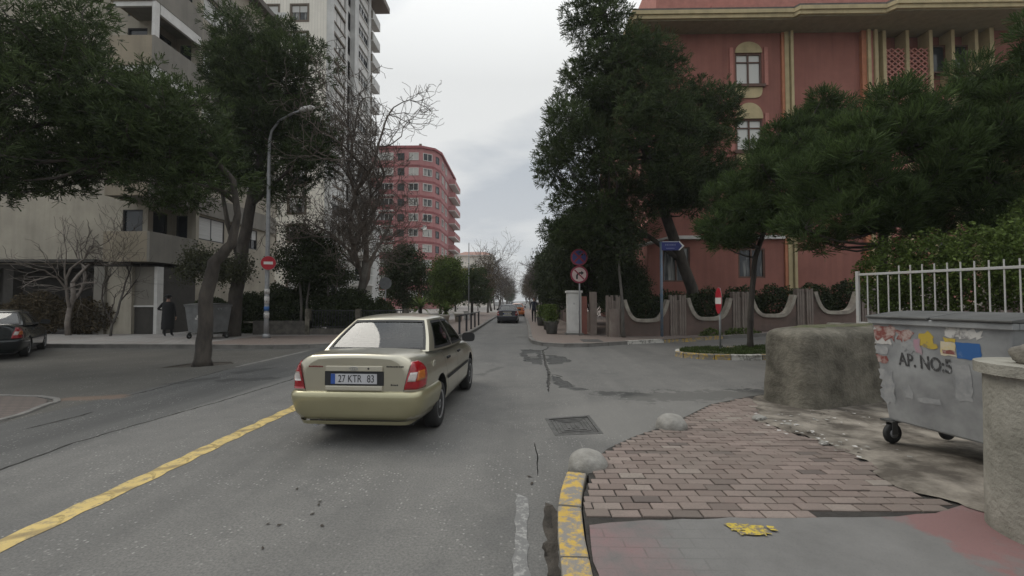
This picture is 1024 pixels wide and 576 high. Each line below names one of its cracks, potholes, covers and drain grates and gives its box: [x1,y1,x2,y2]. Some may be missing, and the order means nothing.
pothole [542,503,561,576]
manhole cover [545,415,603,436]
crack [542,347,562,392]
